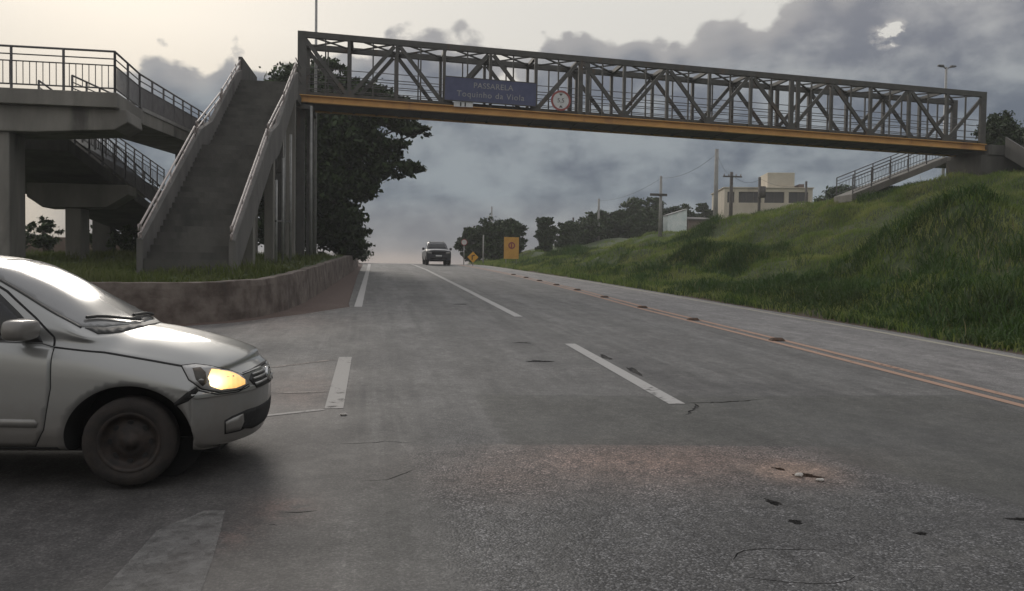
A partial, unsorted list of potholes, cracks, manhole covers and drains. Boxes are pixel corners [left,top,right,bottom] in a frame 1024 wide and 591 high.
crack [686,400,750,415]
crack [733,548,826,560]
crack [749,576,855,584]
